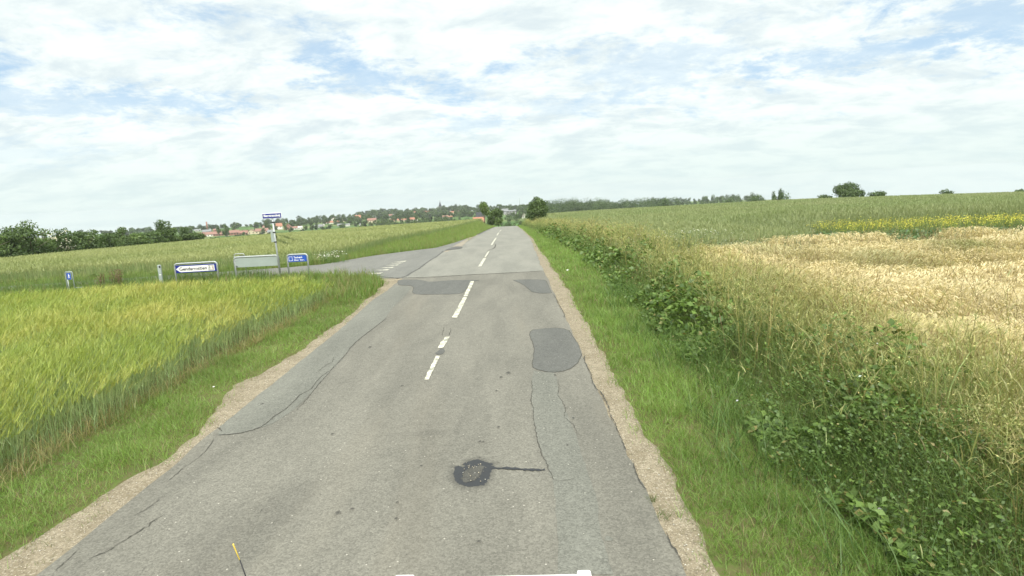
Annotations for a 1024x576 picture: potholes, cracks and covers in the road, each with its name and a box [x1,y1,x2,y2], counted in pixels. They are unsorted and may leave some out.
crack [137,319,385,514]
